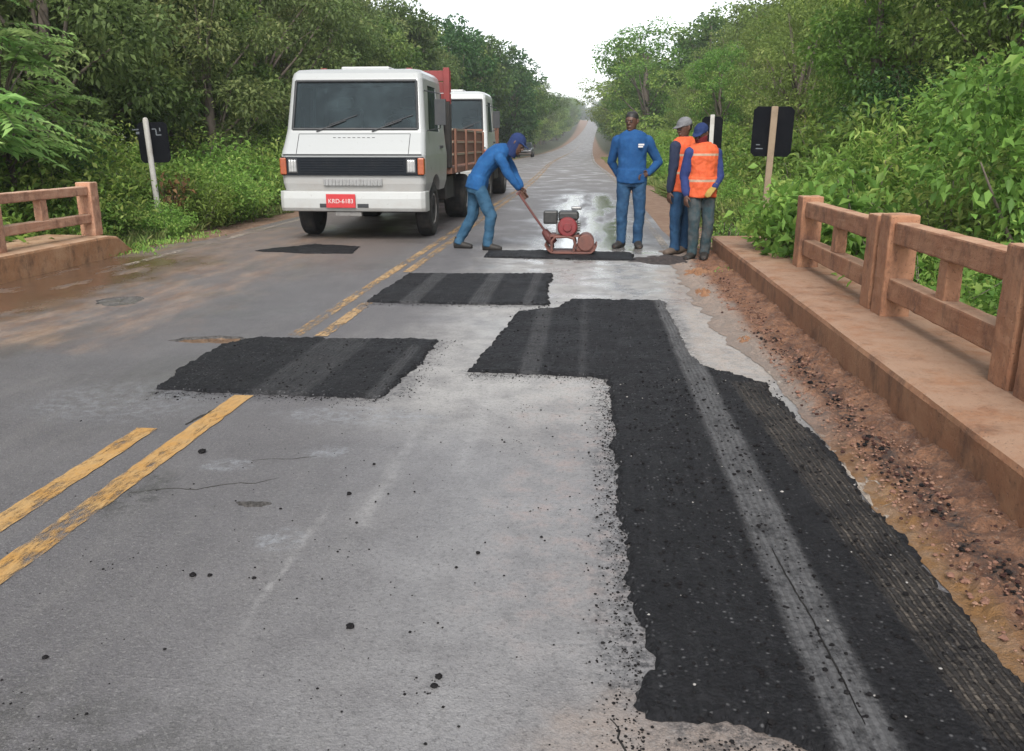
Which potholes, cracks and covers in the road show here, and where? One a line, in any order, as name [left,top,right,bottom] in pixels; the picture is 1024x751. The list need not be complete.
crack [130,456,316,493]
crack [772,548,866,725]
crack [610,719,627,751]
